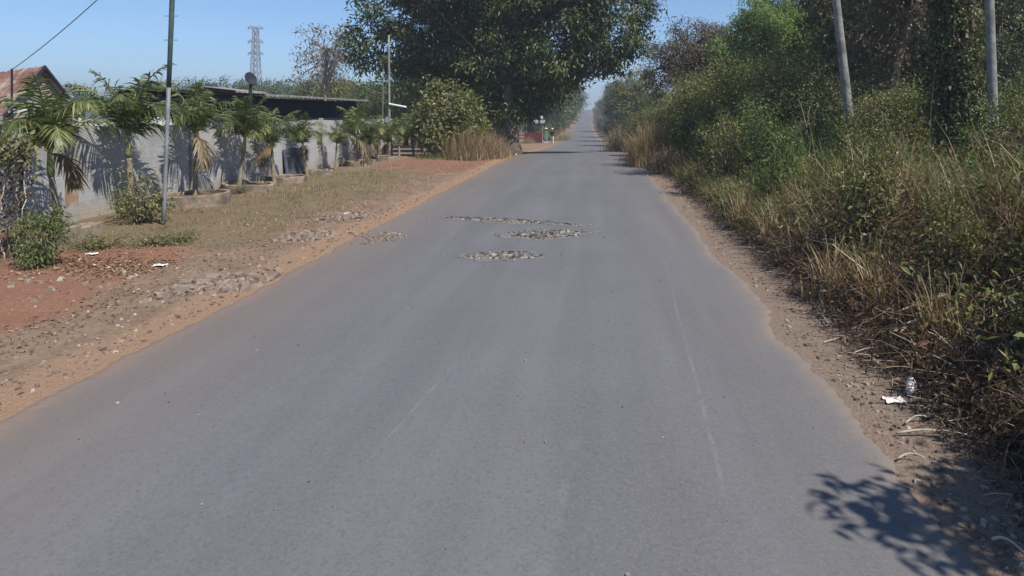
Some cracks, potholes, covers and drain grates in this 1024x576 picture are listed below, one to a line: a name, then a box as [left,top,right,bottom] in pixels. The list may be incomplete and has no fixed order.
pothole [432,216,606,227]
pothole [444,250,547,264]
pothole [495,228,619,240]
